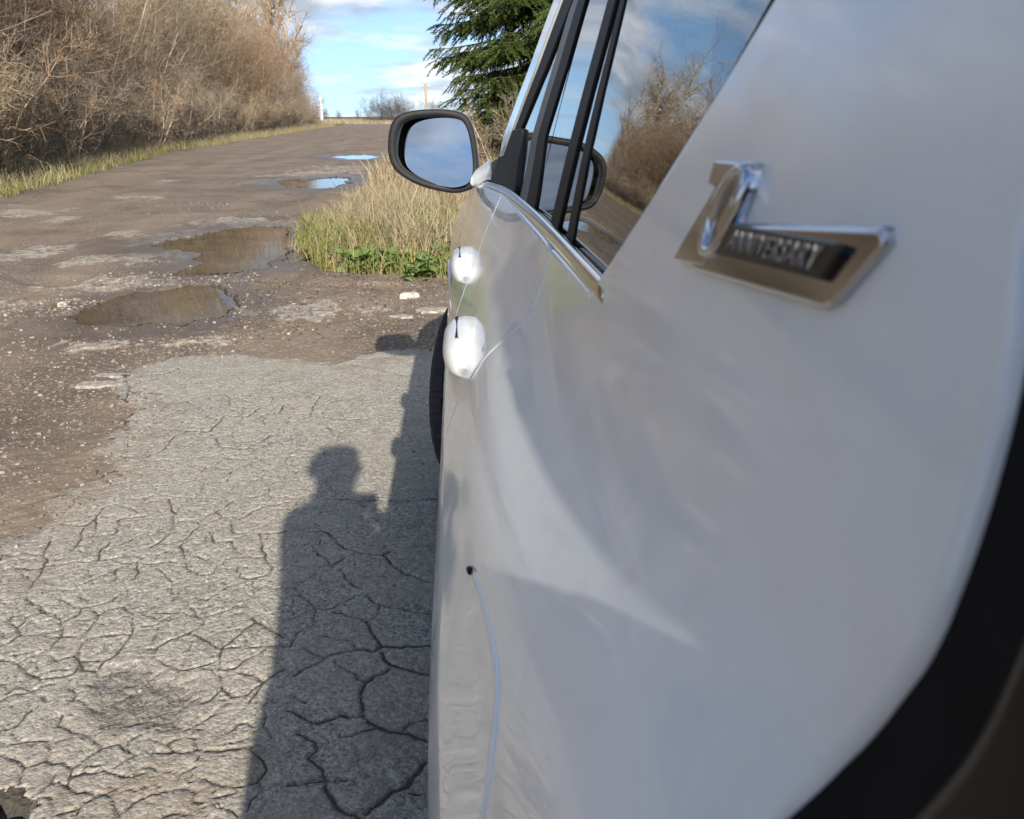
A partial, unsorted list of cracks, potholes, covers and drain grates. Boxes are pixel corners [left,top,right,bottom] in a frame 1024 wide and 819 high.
pothole [67,284,240,327]
crack [0,365,439,819]
pothole [149,225,309,277]
pothole [0,787,38,819]
pothole [277,176,358,189]
